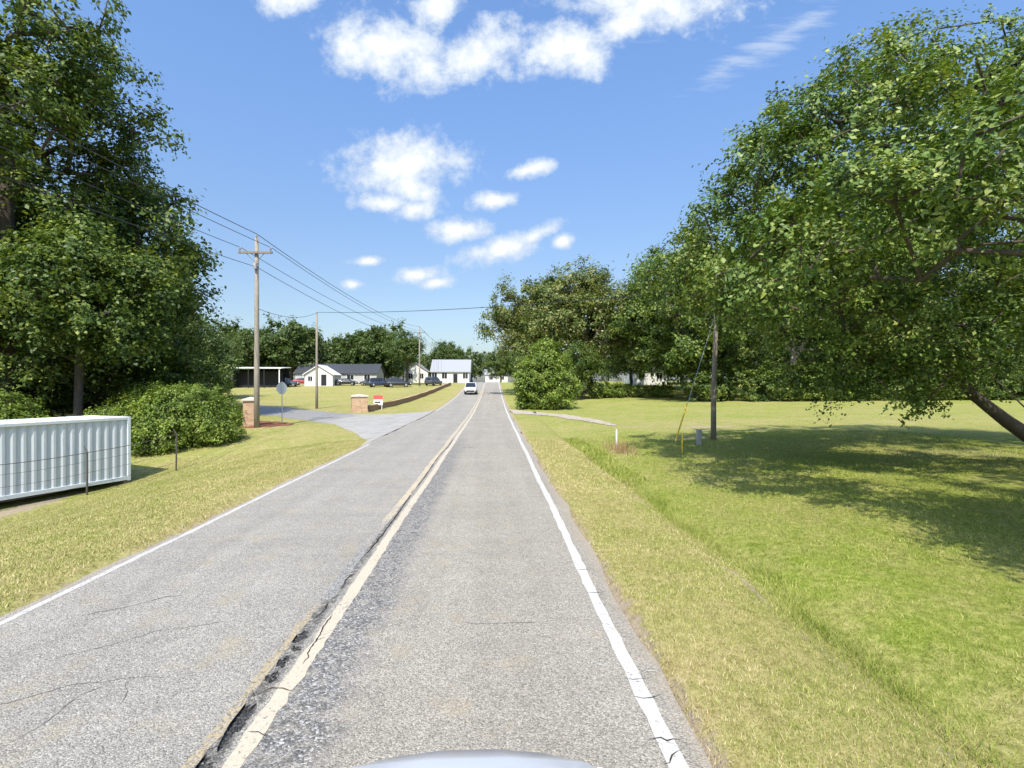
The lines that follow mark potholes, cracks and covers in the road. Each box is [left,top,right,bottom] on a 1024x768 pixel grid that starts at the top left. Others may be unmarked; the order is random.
crack [3,676,168,736]
crack [304,574,352,661]
crack [647,737,683,764]
